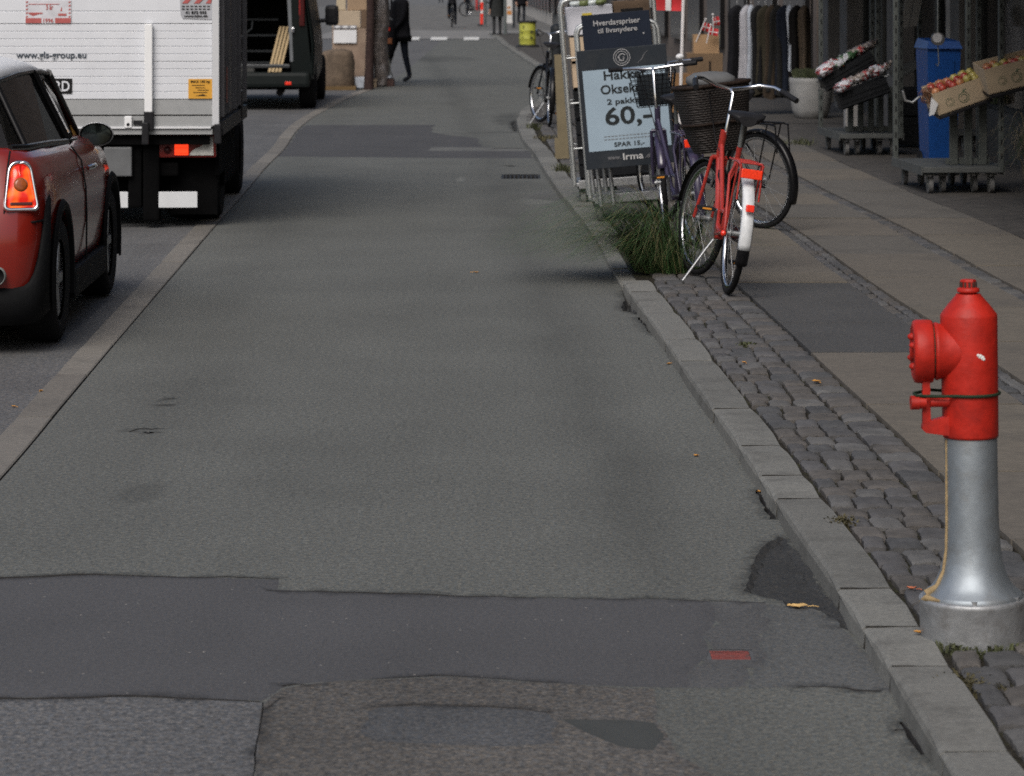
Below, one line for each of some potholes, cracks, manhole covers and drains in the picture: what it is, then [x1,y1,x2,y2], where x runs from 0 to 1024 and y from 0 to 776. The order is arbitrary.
pothole [743,536,849,631]
